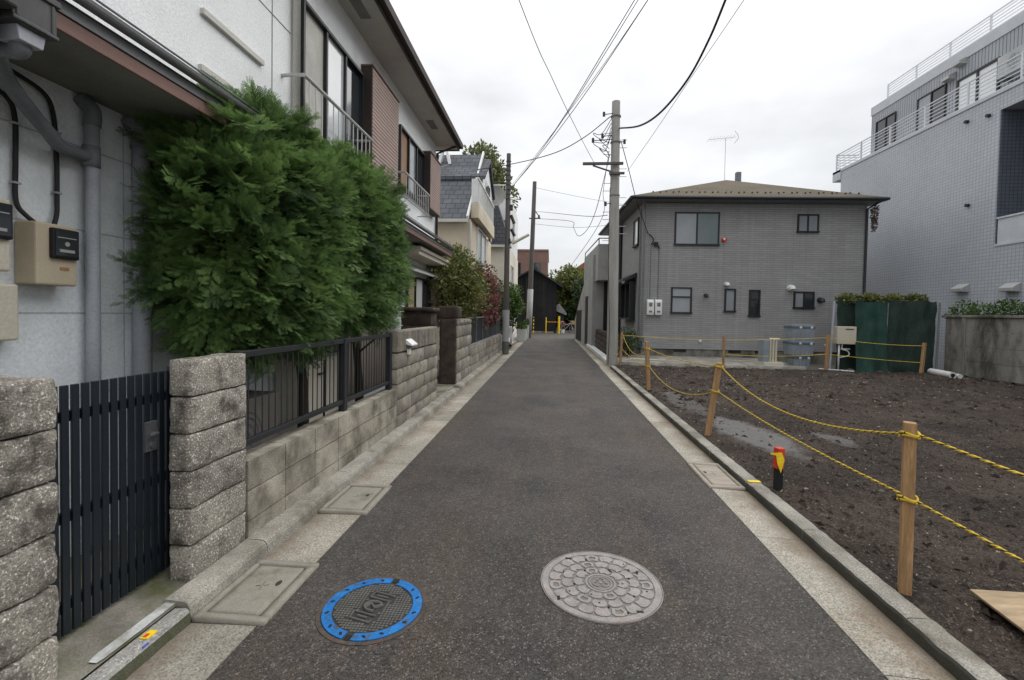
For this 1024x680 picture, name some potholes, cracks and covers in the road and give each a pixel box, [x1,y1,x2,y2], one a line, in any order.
manhole cover [315,576,427,646]
manhole cover [541,551,664,625]
